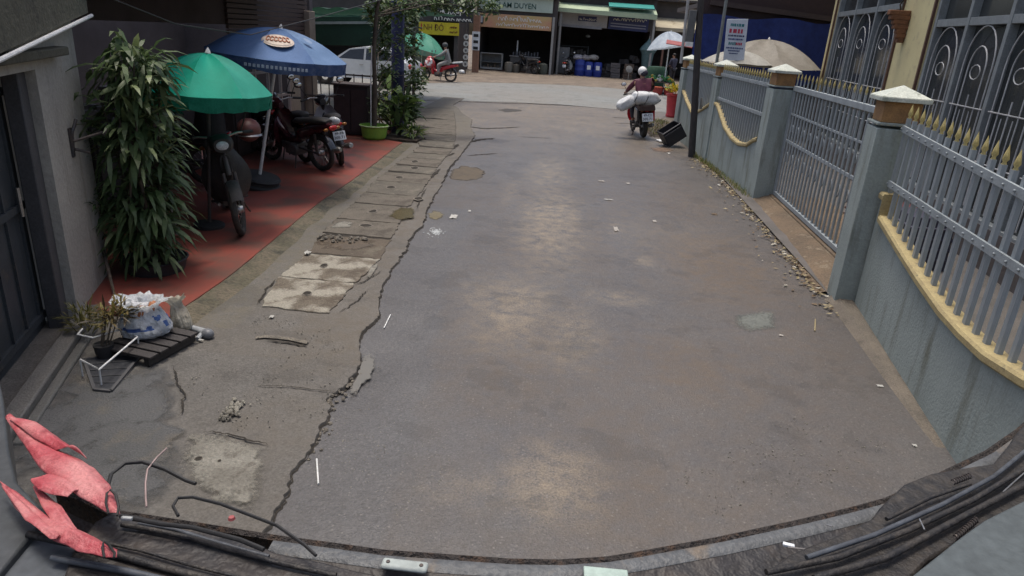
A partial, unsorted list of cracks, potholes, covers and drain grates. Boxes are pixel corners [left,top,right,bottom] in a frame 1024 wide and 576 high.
crack [231,107,537,531]
crack [173,367,186,416]
